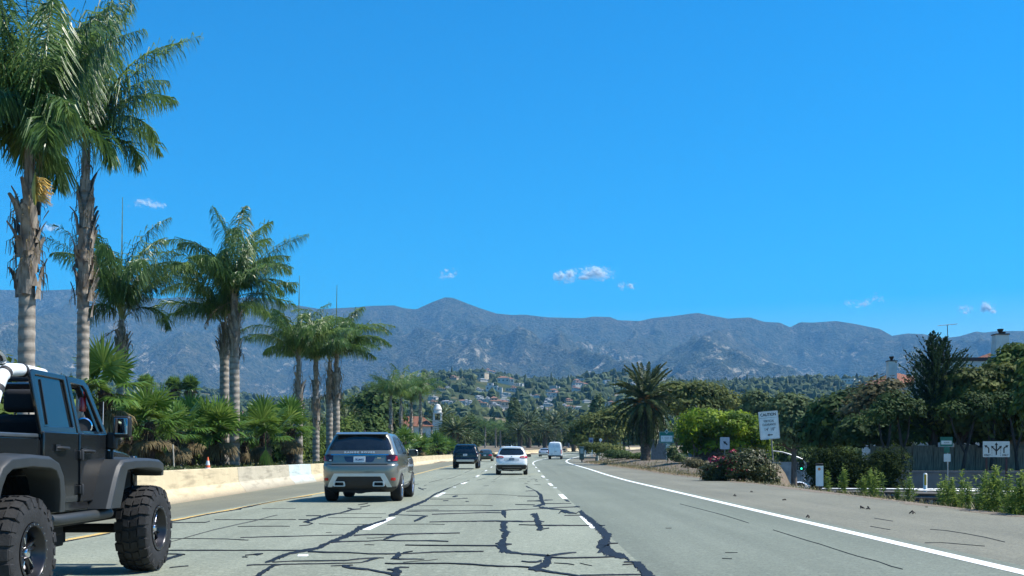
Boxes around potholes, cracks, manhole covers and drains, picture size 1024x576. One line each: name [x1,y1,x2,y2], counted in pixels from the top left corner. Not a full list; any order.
crack [414,465,540,506]
crack [775,530,902,569]
crack [925,529,1004,546]
crack [319,513,386,525]
